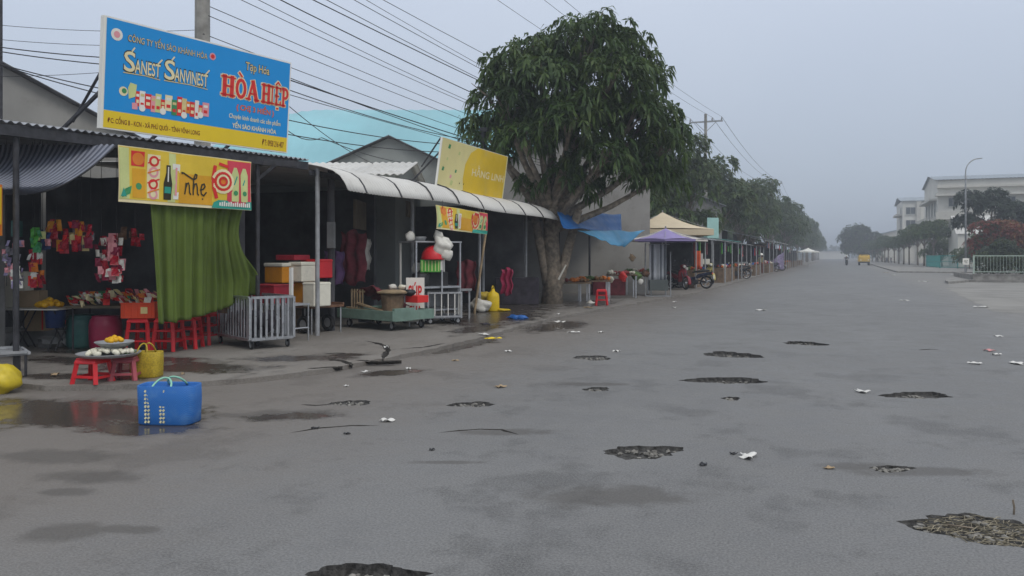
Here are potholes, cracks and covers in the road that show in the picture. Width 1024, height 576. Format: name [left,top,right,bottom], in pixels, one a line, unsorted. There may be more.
pothole [305,563,434,576]
pothole [604,446,684,460]
pothole [870,465,915,473]
pothole [897,512,1024,548]
